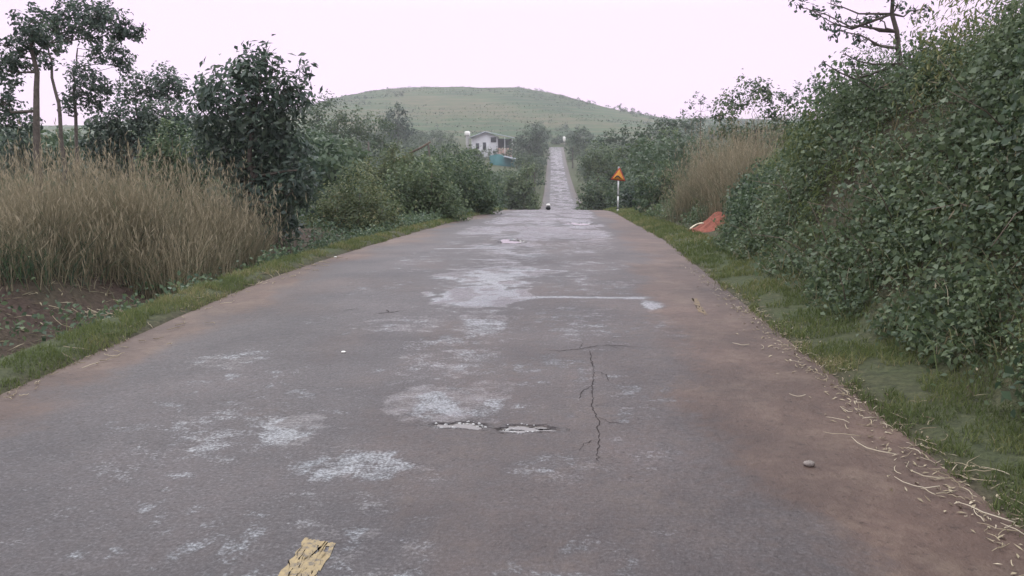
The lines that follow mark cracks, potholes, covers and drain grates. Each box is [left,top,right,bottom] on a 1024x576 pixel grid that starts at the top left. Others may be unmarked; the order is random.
pothole [421,420,494,431]
pothole [487,423,570,434]
crack [557,343,638,459]
